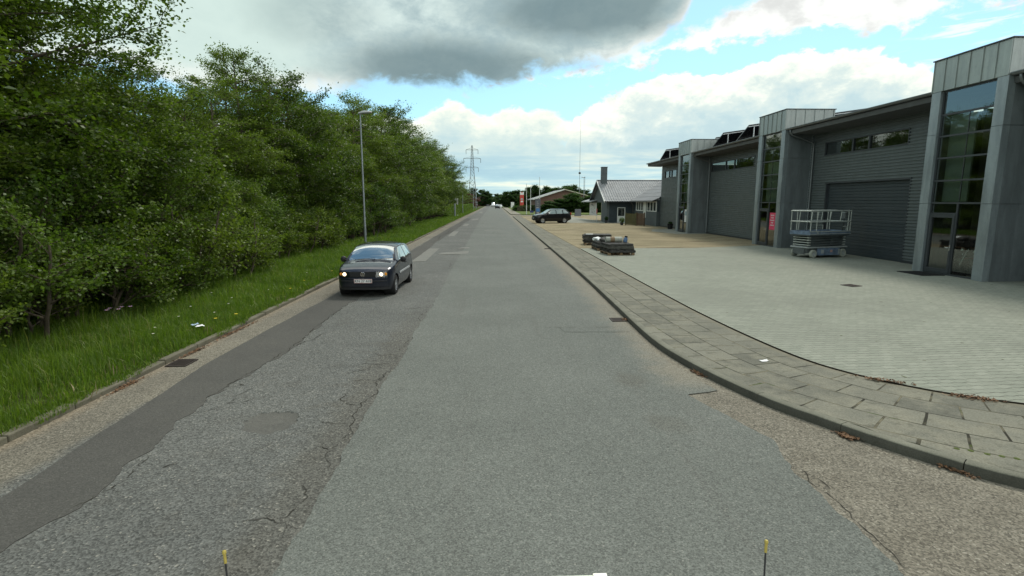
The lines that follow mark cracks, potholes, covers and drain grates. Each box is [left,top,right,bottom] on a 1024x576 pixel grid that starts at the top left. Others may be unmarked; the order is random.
drain grate [165,359,199,367]
crack [244,484,308,539]
crack [304,336,409,474]
crack [786,456,905,568]
